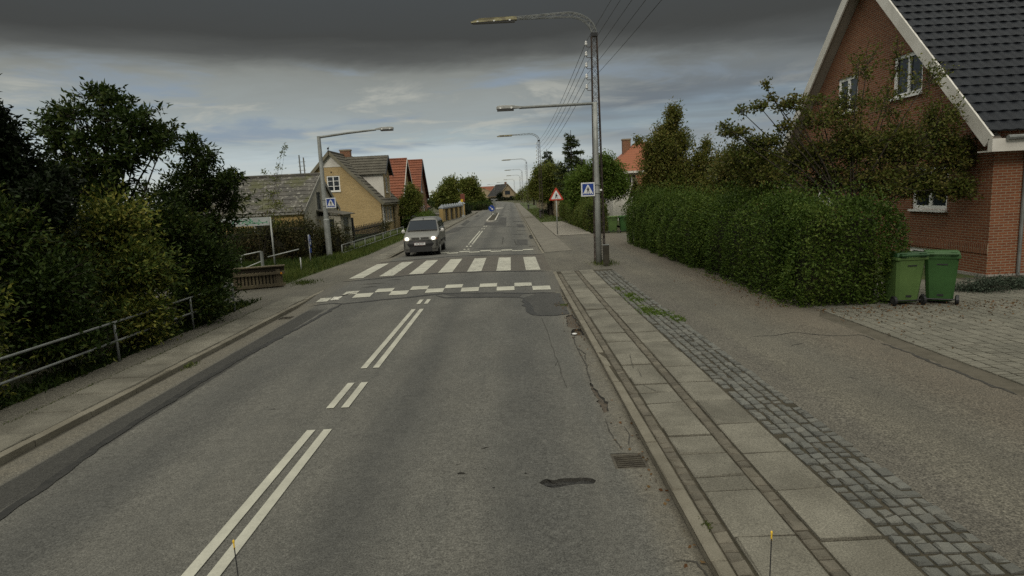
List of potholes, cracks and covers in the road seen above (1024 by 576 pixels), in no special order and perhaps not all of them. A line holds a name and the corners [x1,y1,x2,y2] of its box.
pothole [590,382,609,413]
drain grate [610,453,650,469]
crack [542,319,591,387]
pothole [566,314,581,328]
